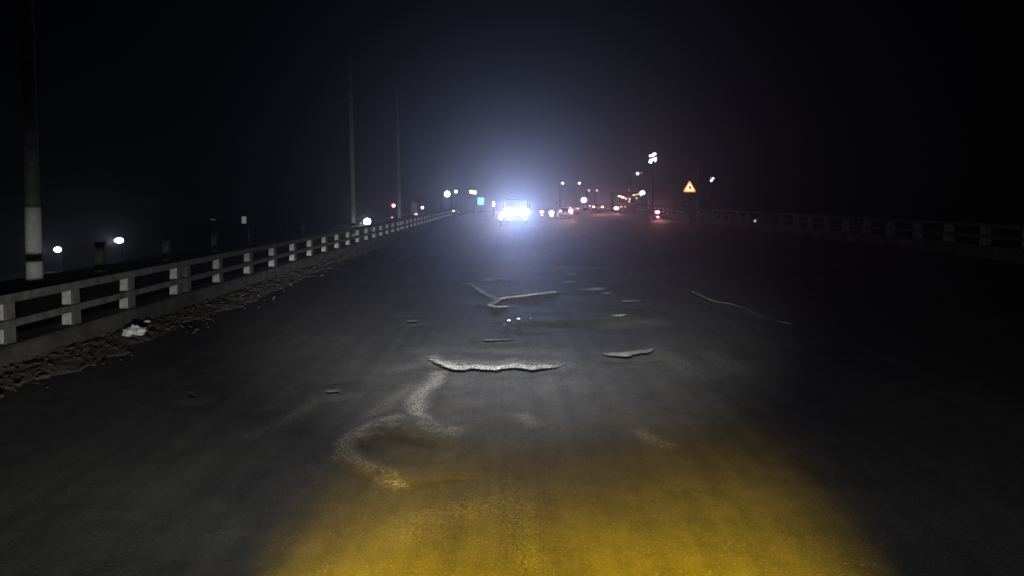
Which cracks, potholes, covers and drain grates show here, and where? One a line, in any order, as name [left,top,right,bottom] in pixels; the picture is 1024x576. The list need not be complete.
pothole [322,410,496,487]
pothole [579,340,674,364]
pothole [412,351,585,379]
crack [680,290,813,329]
crack [457,282,568,310]
pothole [567,285,614,293]
